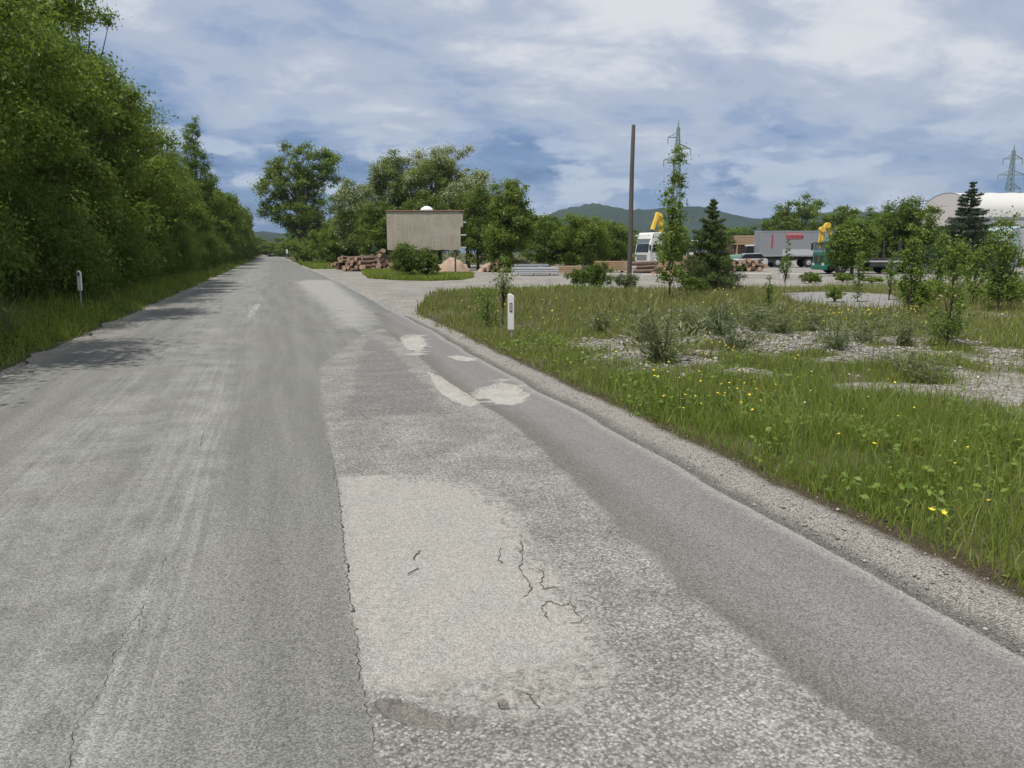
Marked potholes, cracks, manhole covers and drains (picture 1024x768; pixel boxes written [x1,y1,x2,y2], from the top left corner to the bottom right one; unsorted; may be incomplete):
crack [69,558,166,768]
crack [498,540,598,632]
pothole [369,698,481,734]
